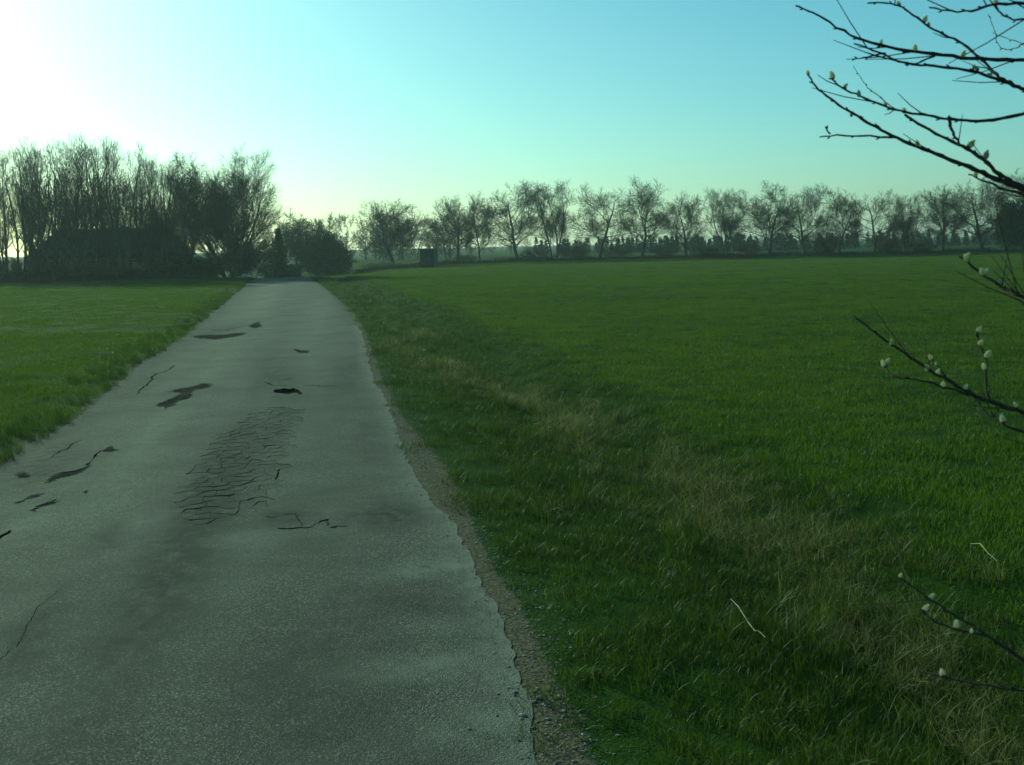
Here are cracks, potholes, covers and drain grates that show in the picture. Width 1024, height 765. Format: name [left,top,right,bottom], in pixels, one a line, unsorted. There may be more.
crack [137,365,174,394]
crack [174,407,346,529]
pothole [155,382,213,409]
pothole [191,332,248,340]
crack [0,588,61,660]
